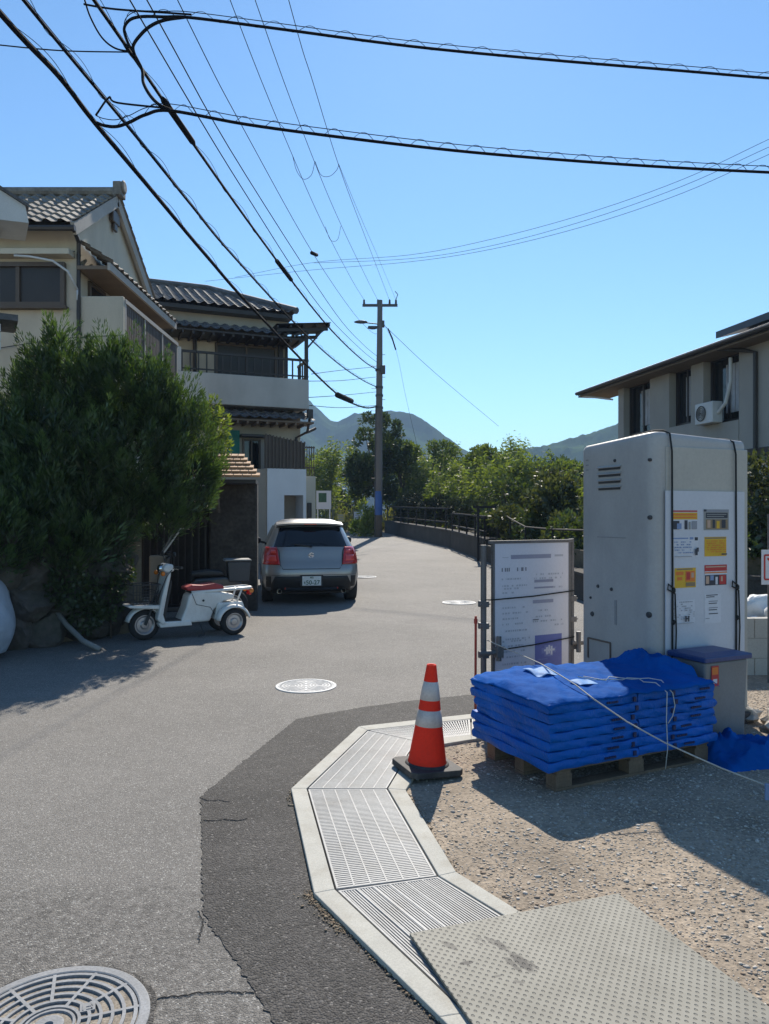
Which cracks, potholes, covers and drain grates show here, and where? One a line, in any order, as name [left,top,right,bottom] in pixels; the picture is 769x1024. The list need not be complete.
manhole cover [275,679,337,693]
manhole cover [0,964,157,1024]
crack [203,799,247,821]
crack [197,911,206,943]
crack [157,990,254,1000]
